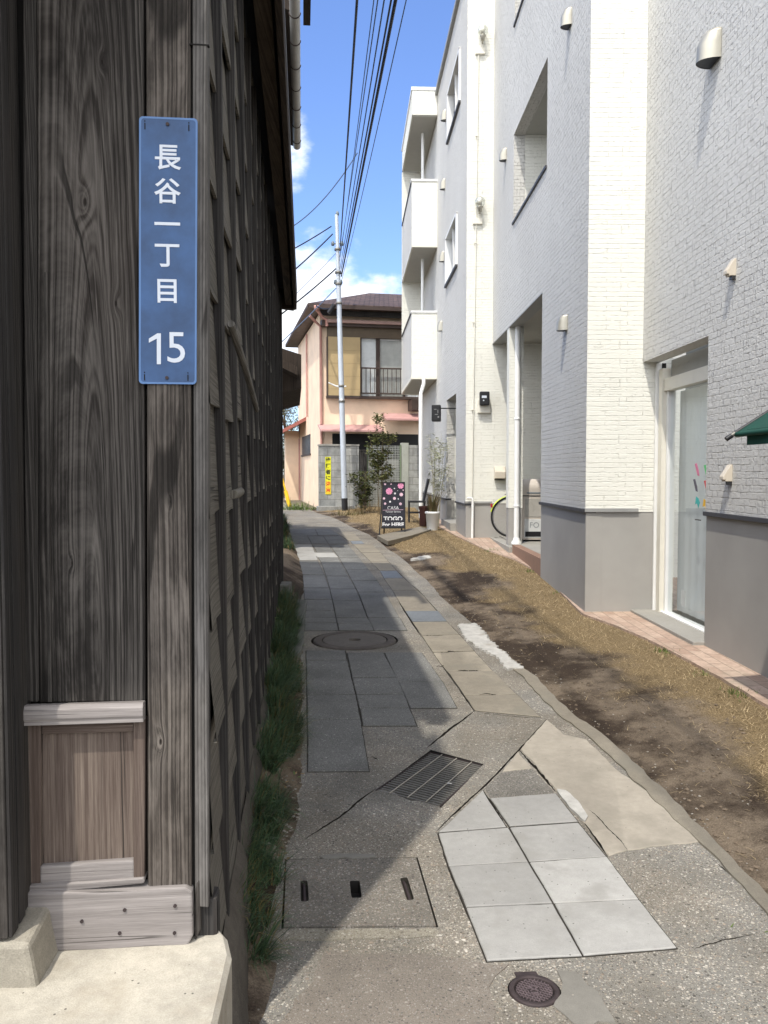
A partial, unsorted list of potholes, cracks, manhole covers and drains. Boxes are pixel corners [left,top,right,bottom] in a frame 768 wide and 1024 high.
manhole cover [509,971,560,1008]
manhole cover [313,631,396,651]
drain grate [376,752,482,808]
manhole cover [284,858,436,928]
